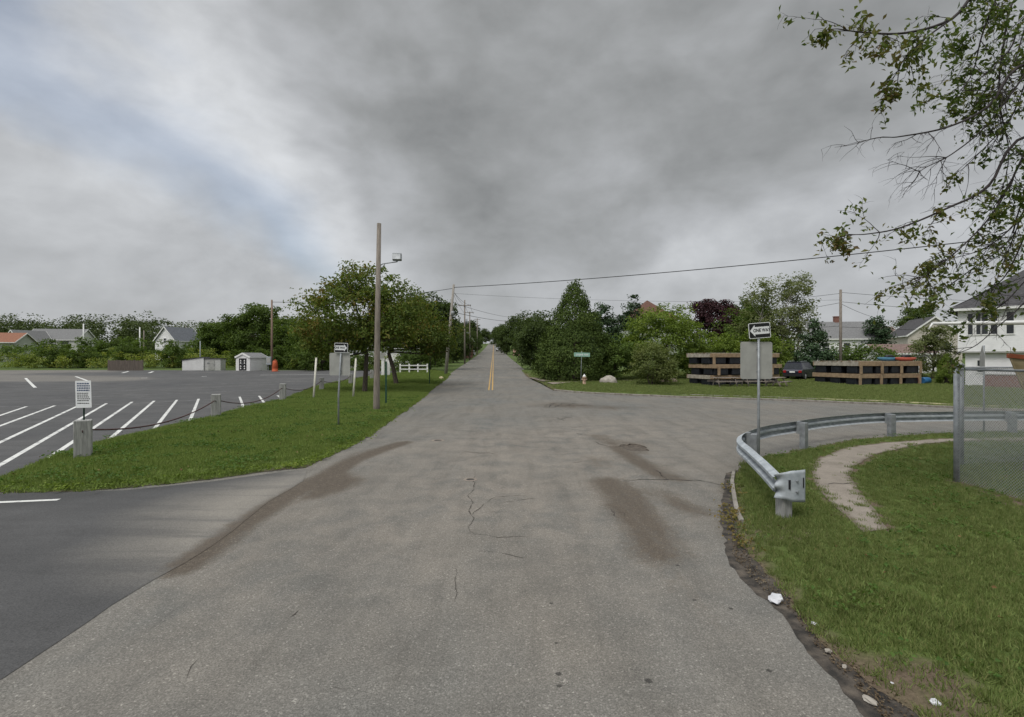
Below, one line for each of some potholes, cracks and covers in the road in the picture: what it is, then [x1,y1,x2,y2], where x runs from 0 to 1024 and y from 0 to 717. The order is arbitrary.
crack [468,481,536,558]
pothole [619,443,649,451]
